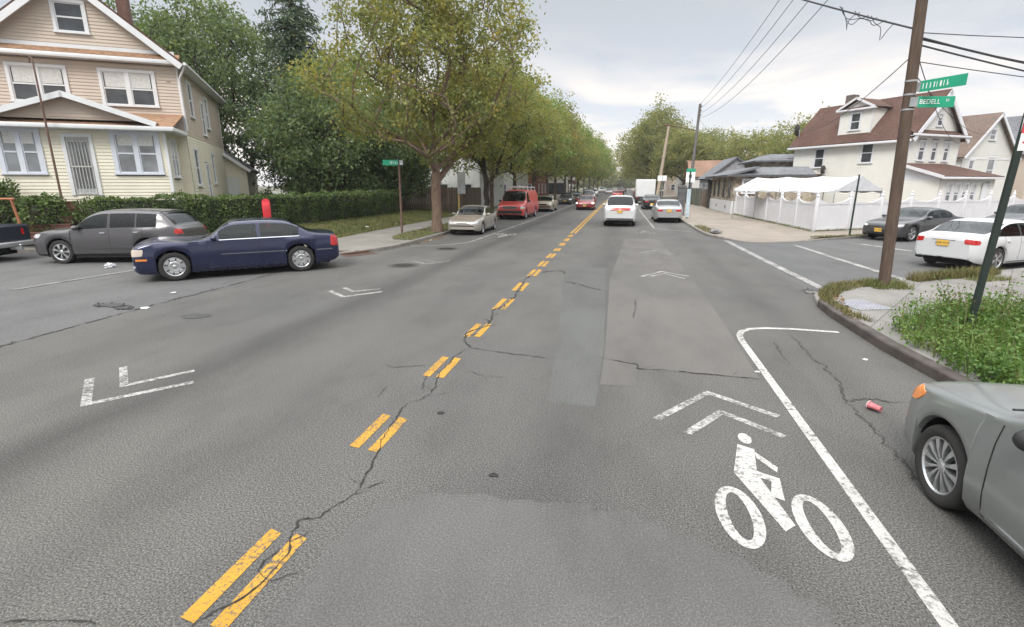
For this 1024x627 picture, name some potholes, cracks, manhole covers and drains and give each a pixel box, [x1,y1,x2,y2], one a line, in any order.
crack [606,358,759,379]
crack [192,271,601,626]
